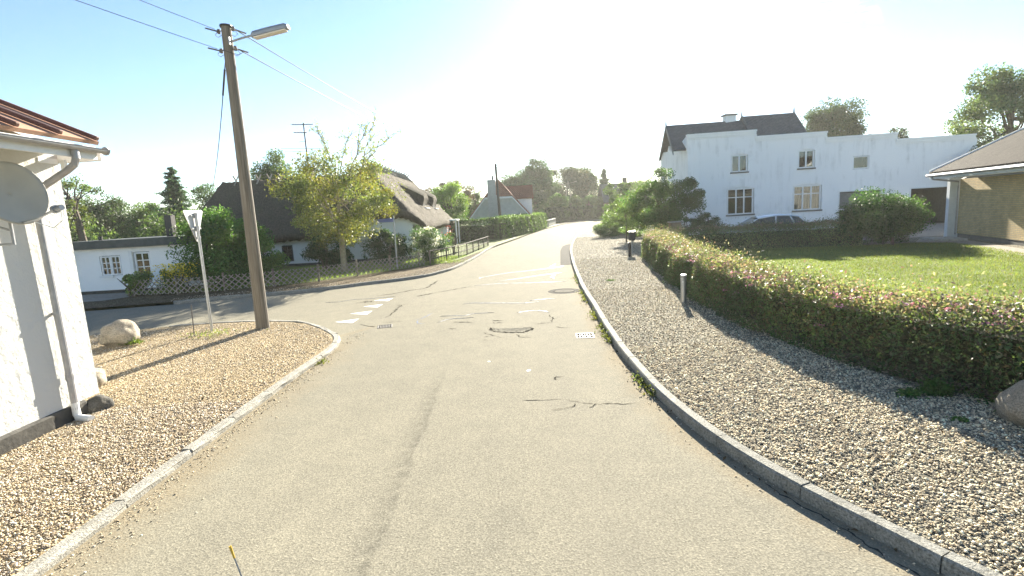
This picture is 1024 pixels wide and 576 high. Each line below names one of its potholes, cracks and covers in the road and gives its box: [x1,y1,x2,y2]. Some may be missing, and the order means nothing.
crack [360,280,471,322]
